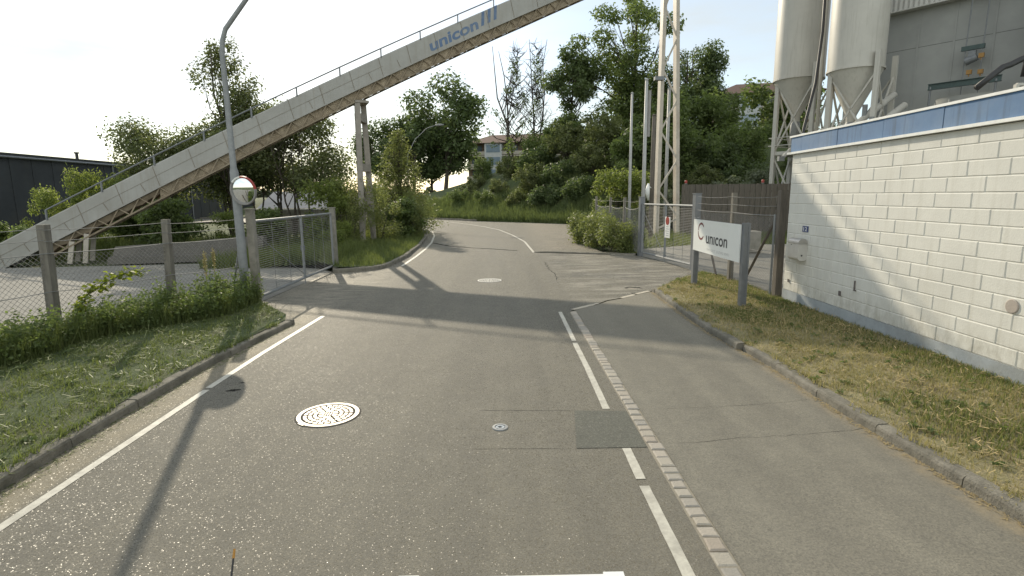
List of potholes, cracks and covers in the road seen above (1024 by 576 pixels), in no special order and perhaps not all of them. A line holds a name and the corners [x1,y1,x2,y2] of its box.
manhole cover [294,403,361,428]
